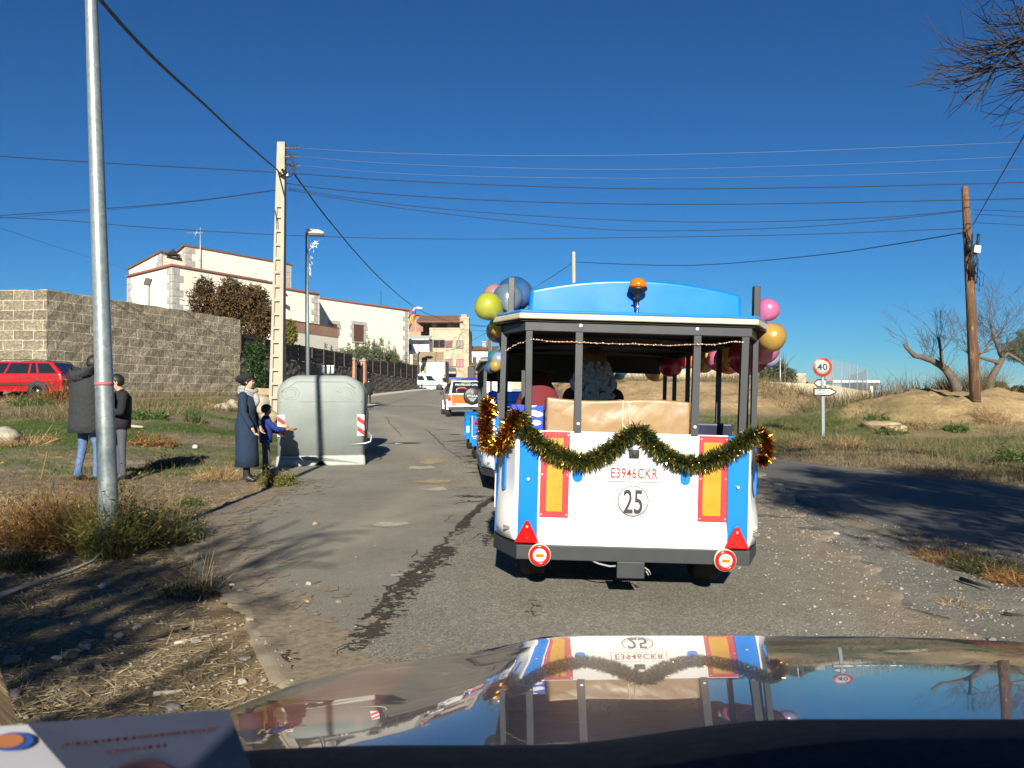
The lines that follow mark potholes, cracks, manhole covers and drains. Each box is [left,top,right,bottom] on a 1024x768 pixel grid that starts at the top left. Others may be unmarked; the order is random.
crack [336,429,495,655]
